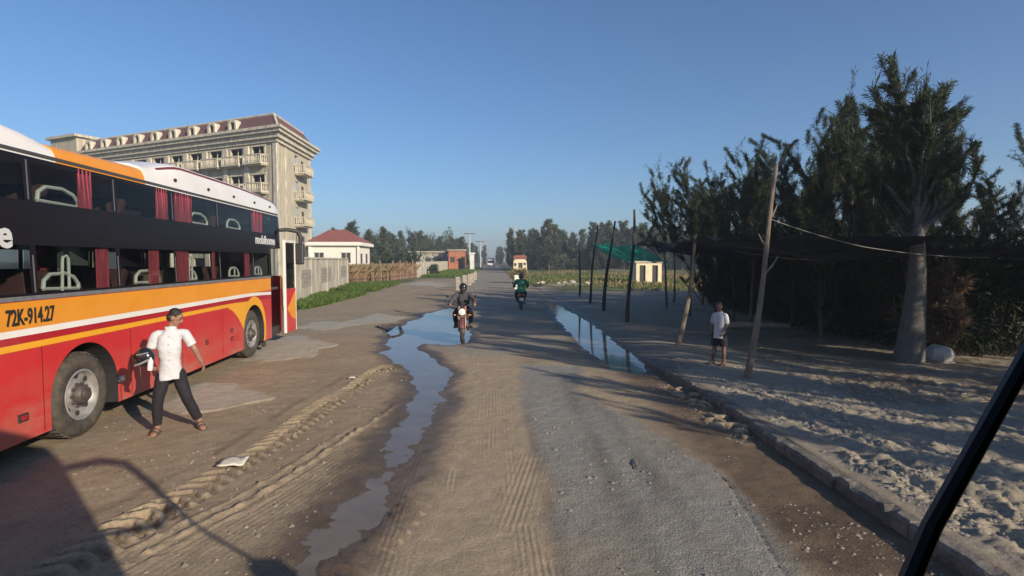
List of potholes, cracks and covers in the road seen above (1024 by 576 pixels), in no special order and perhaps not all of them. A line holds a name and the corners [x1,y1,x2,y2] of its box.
pothole [375,323,405,337]
